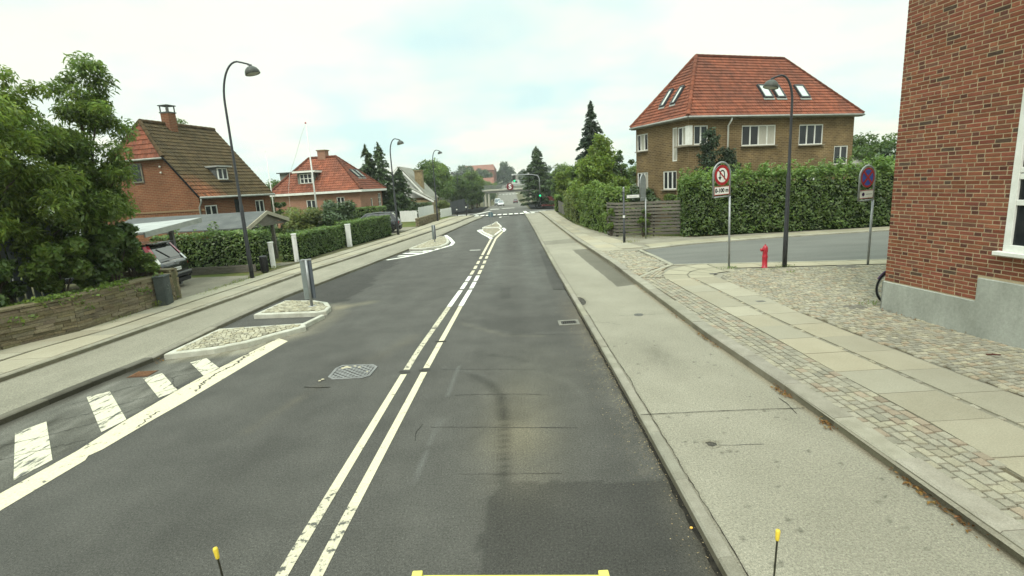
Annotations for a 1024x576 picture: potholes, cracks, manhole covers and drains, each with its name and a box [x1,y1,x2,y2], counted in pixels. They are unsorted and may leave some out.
manhole cover [318,364,378,381]
